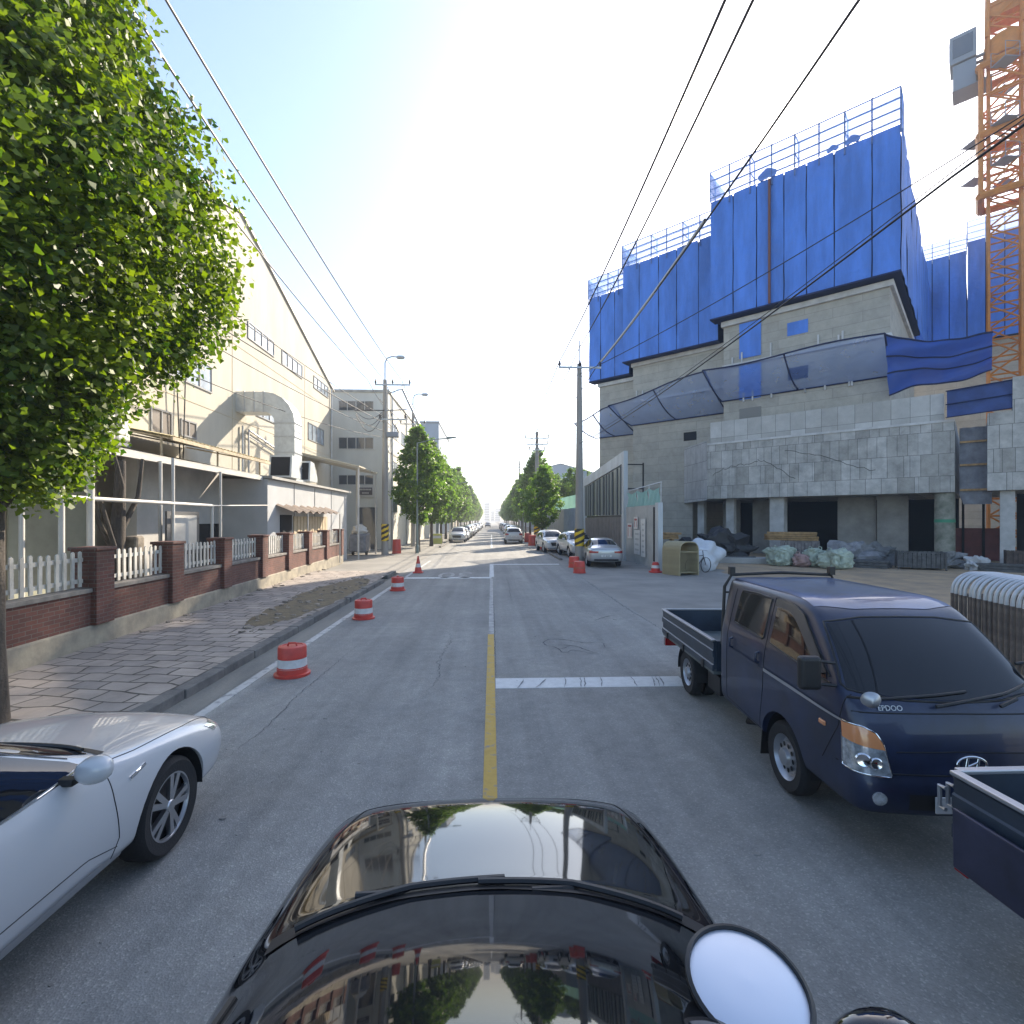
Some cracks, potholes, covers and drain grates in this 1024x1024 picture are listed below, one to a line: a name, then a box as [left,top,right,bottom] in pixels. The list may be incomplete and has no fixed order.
crack [535,635,605,654]
crack [225,646,356,758]
